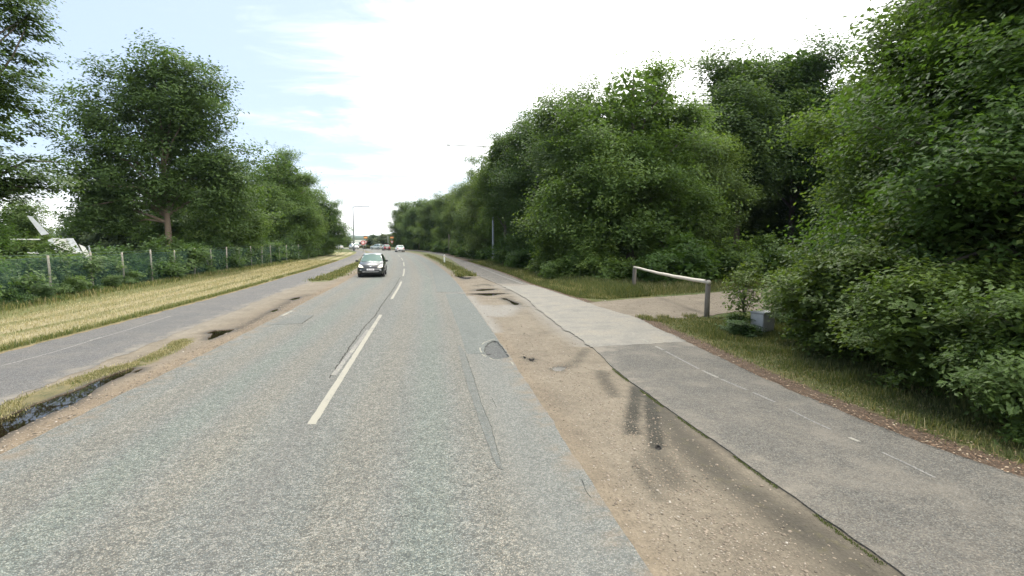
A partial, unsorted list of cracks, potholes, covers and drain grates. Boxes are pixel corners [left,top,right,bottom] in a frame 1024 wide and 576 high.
pothole [0,368,135,438]
pothole [484,341,509,359]
pothole [207,329,234,340]
